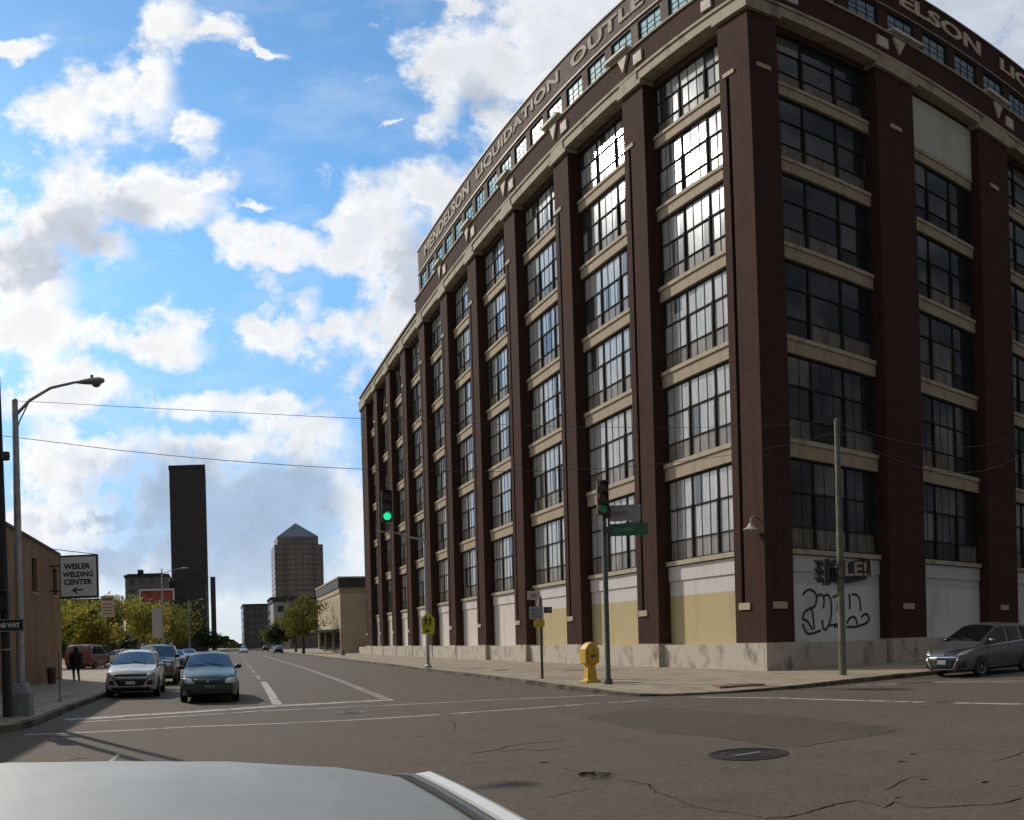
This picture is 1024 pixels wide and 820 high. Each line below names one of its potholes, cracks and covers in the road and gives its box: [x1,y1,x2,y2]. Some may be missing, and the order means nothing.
manhole cover [708,748,789,760]
crack [463,740,562,766]
pothole [578,771,617,781]
crack [615,776,1023,819]
